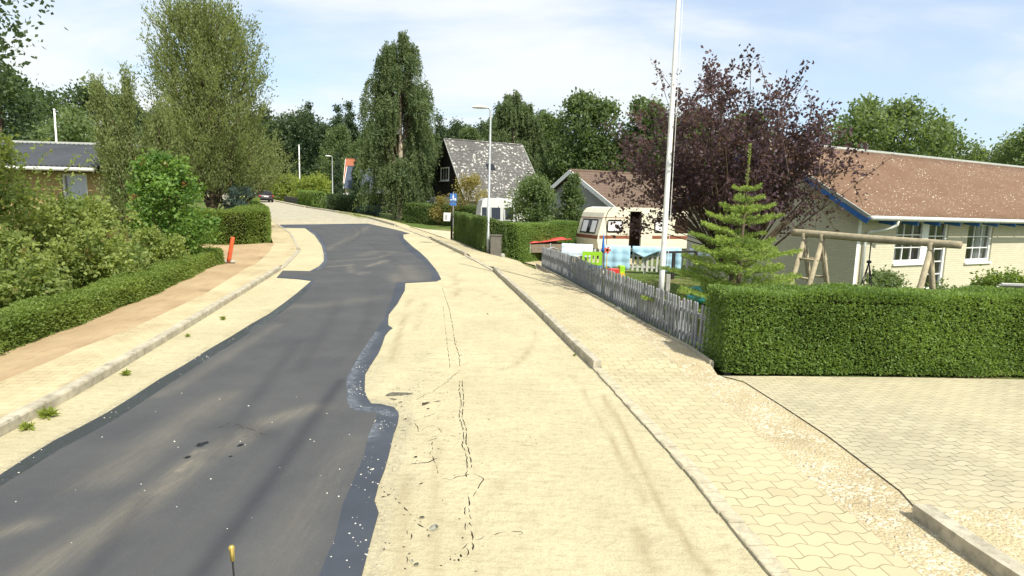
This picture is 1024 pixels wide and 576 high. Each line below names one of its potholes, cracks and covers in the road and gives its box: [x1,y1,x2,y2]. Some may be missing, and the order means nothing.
crack [411,293,521,561]
